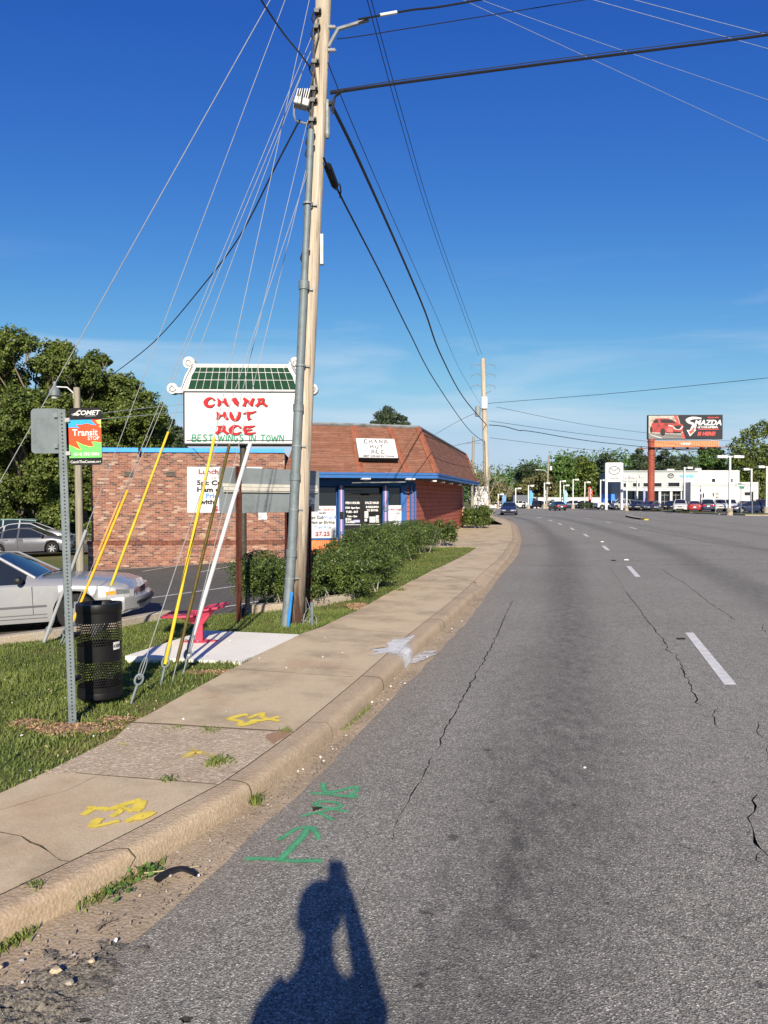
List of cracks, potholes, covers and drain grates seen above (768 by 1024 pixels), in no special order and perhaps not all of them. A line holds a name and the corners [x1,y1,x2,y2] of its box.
crack [614,573,768,770]
crack [0,832,71,866]
crack [649,794,768,866]
